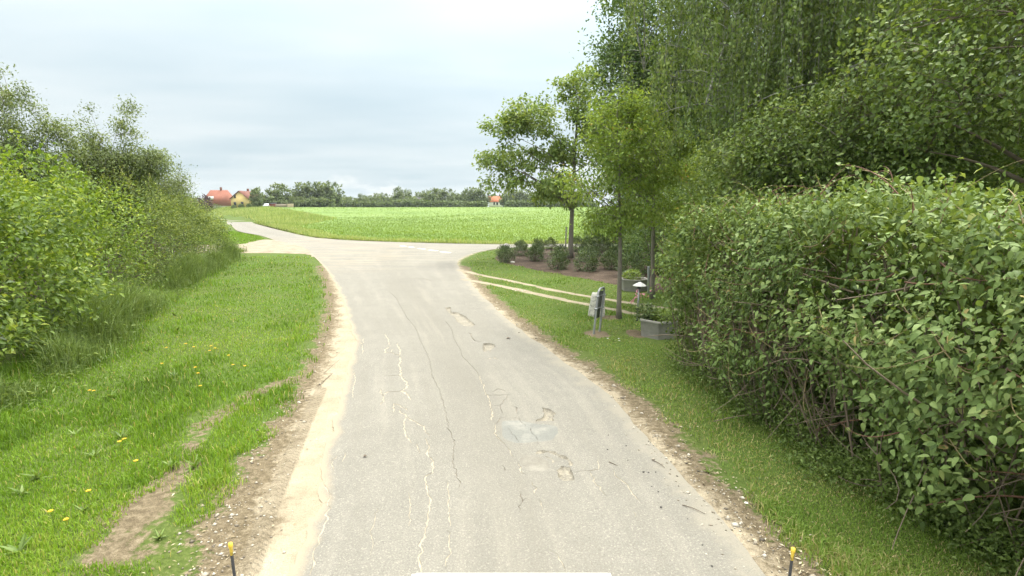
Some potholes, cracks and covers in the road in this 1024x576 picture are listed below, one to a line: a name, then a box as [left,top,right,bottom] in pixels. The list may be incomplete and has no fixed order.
pothole [557,466,575,481]
pothole [536,407,556,421]
crack [494,389,543,512]
pothole [445,307,475,327]
crack [380,335,451,573]
